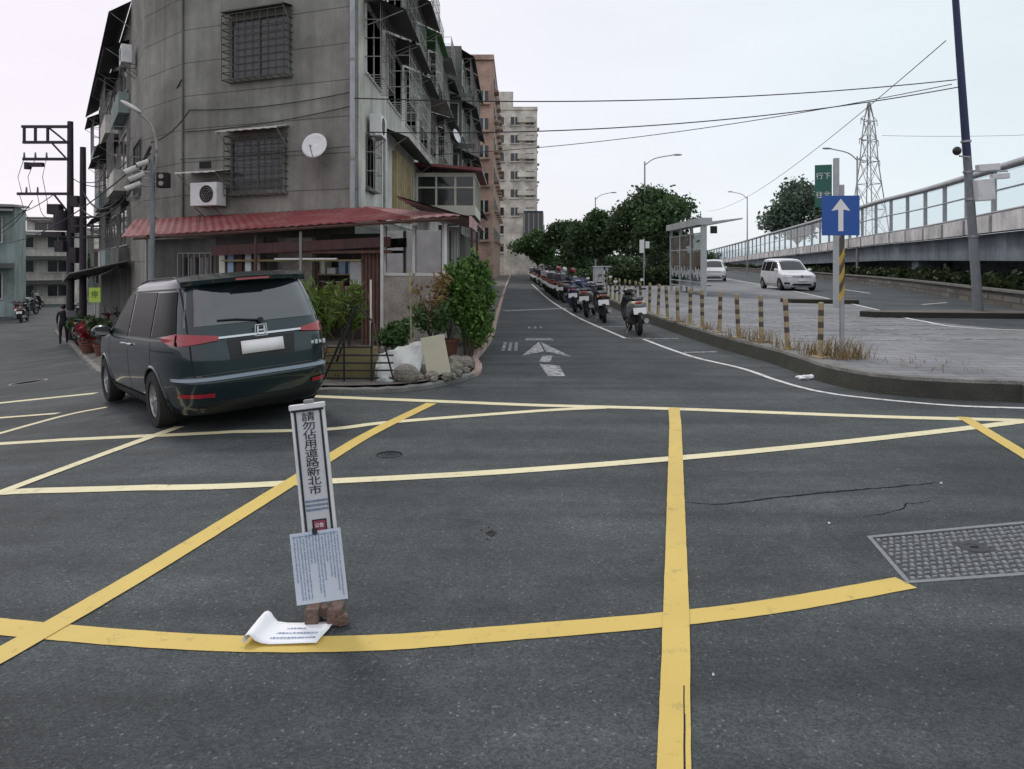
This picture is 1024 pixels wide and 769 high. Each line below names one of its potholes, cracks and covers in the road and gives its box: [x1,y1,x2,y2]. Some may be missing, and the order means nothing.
manhole cover [867,521,1024,584]
crack [686,482,936,517]
